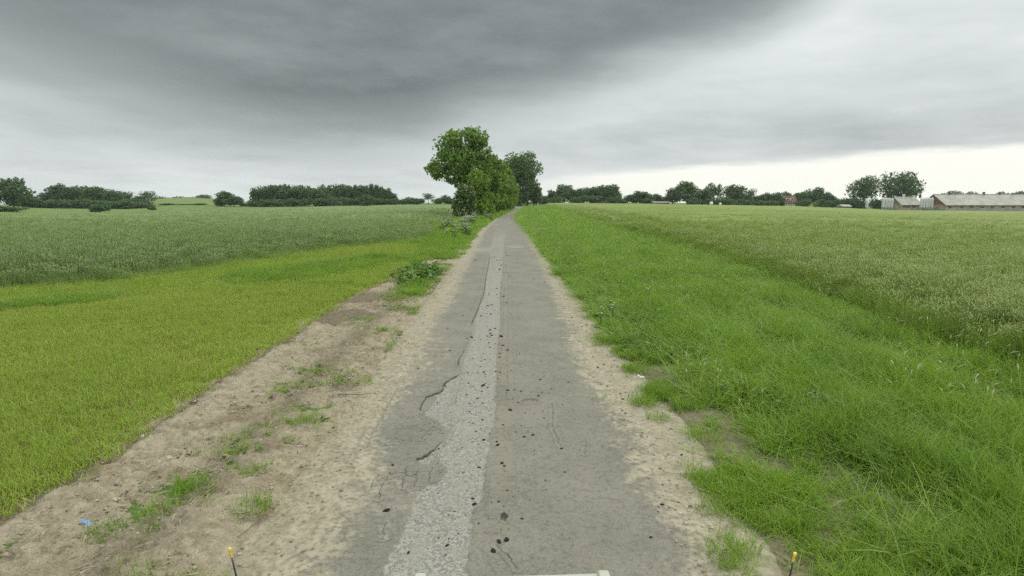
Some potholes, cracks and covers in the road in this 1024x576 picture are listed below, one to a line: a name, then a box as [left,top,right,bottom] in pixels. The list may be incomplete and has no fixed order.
crack [465,257,493,326]
crack [490,540,524,573]
crack [454,349,469,366]
crack [547,401,591,456]
crack [364,411,453,543]
